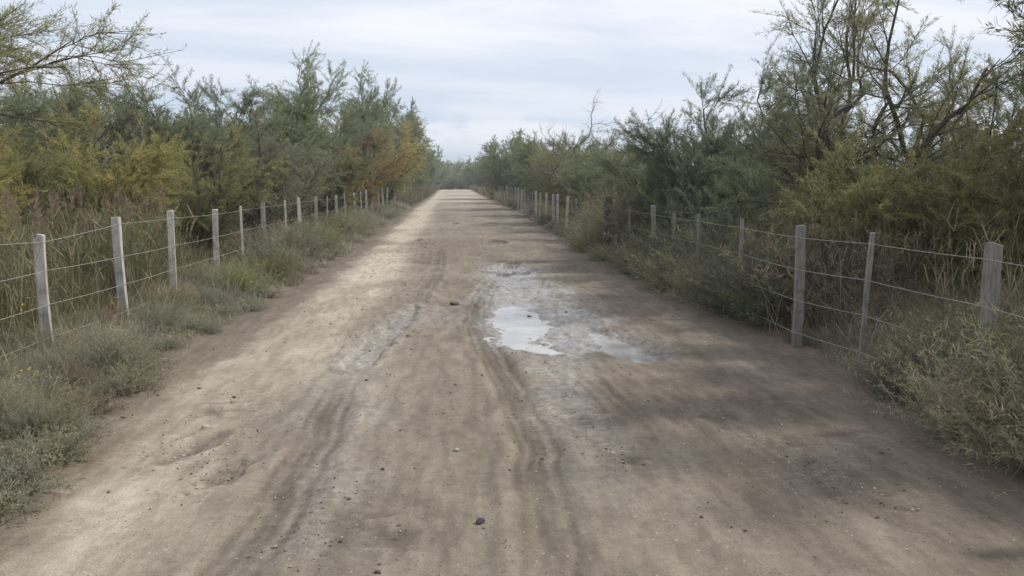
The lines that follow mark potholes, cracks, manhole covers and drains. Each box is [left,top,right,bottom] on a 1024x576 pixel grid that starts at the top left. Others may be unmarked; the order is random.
pothole [154,452,271,497]
pothole [327,302,431,374]
pothole [122,427,246,471]
pothole [471,262,688,363]
